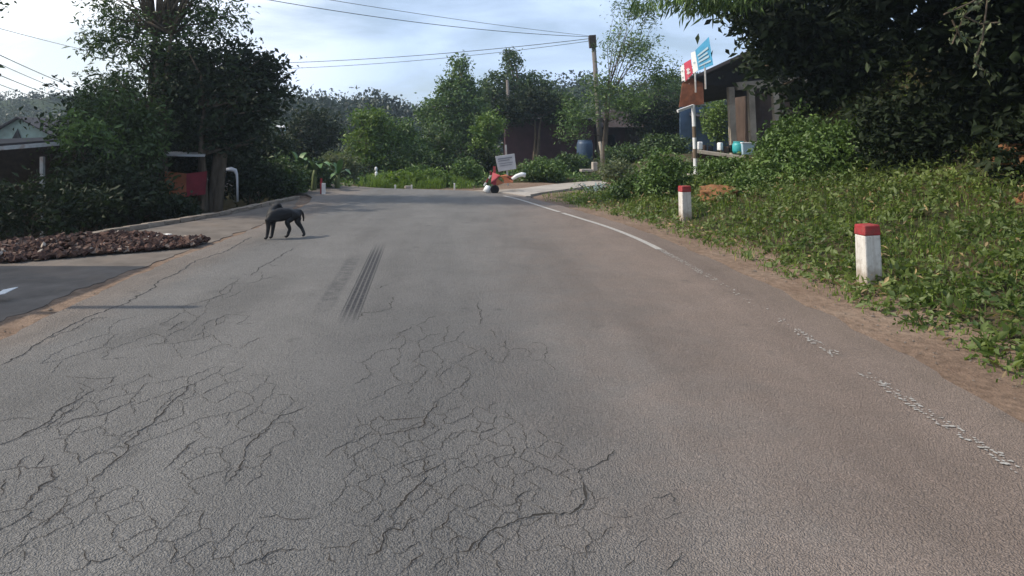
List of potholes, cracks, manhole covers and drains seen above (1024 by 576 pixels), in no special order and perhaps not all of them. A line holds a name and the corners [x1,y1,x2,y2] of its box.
crack [0,237,682,576]
